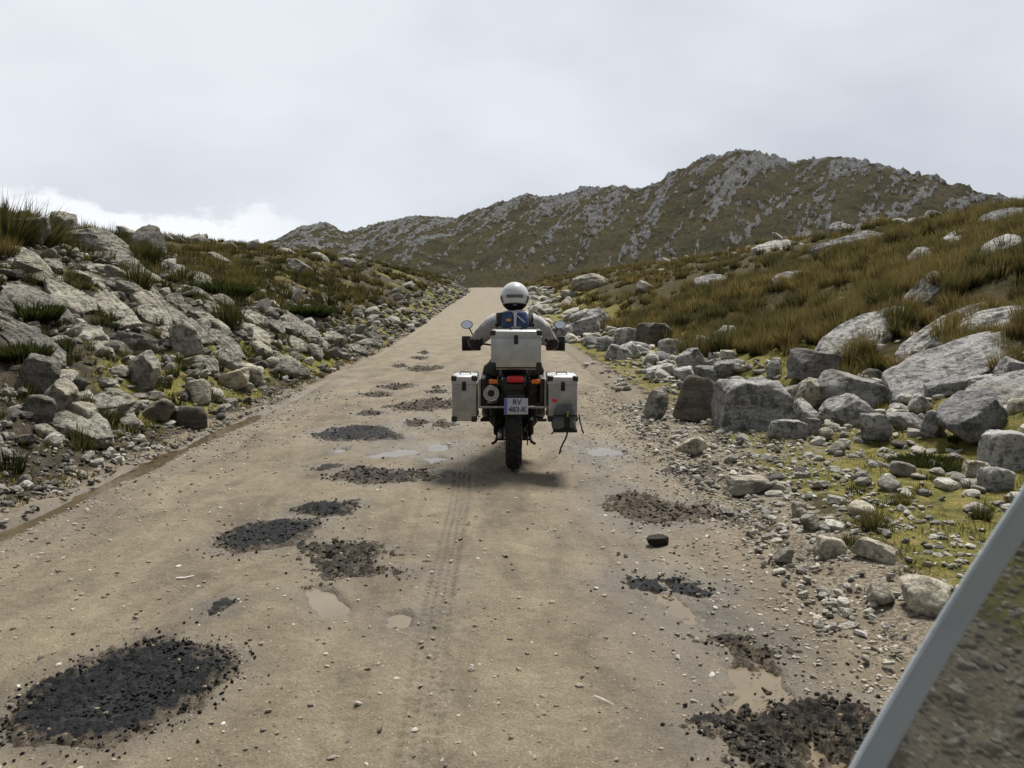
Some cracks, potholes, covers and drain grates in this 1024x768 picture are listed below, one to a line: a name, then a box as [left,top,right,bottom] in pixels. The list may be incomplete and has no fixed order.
pothole [660,662,881,768]
